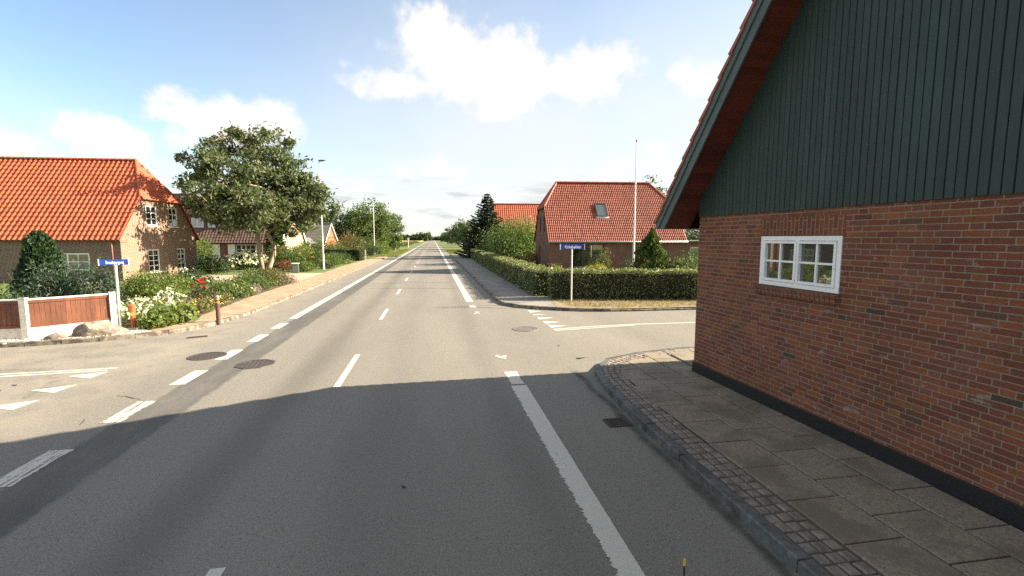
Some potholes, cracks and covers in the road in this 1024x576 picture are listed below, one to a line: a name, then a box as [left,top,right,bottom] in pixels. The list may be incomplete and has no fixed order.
drain grate [603,417,631,428]
manhole cover [234,359,276,369]
manhole cover [187,352,227,361]
